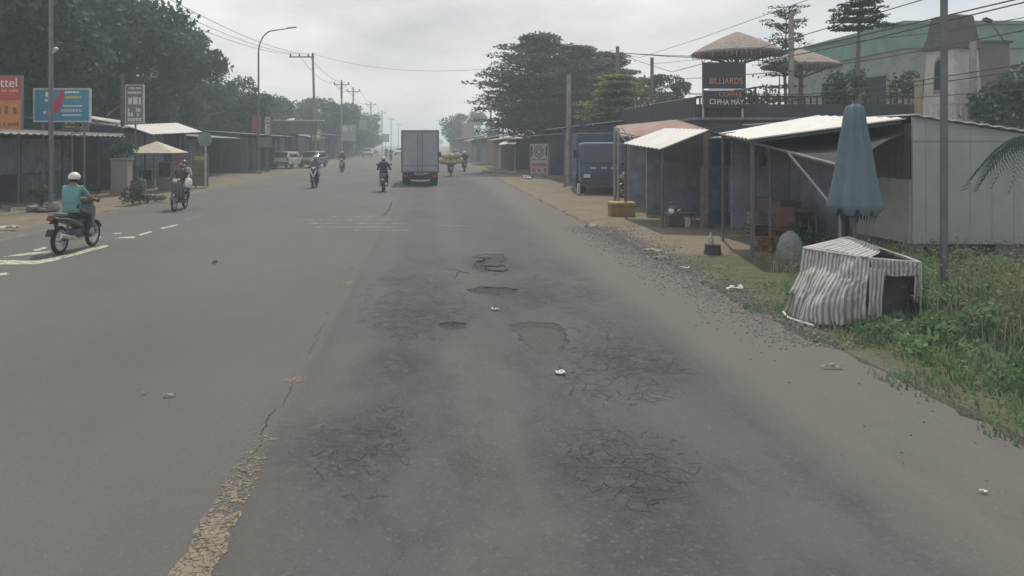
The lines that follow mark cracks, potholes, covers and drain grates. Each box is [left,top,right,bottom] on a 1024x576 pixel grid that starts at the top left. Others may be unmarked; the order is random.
pothole [508,321,569,355]
pothole [472,254,508,275]
crack [560,320,690,406]
crack [311,405,413,503]
pothole [466,286,519,296]
pothole [439,321,467,329]
crack [559,429,700,511]
